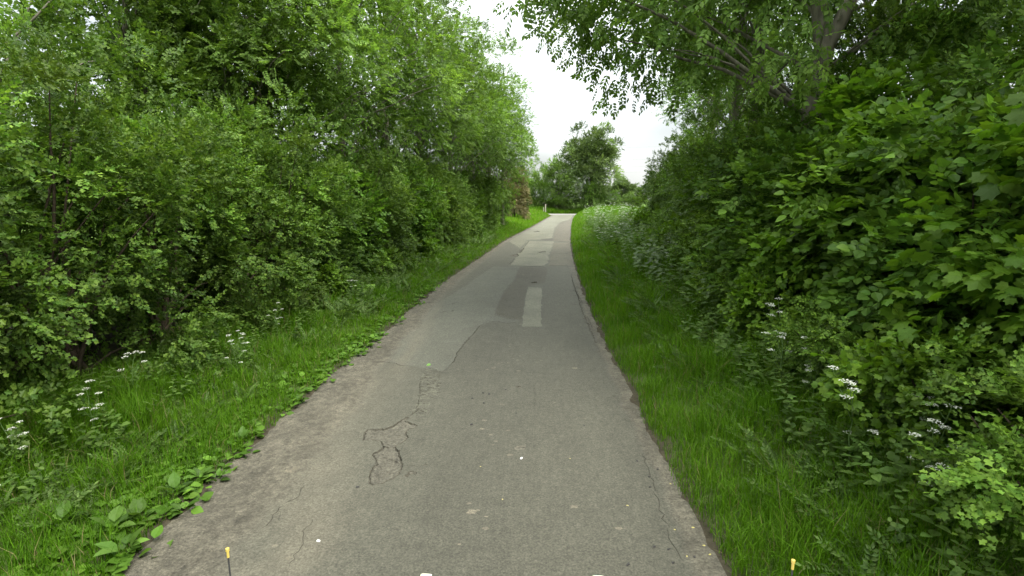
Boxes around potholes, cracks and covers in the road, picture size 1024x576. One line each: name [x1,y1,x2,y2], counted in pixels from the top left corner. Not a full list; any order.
crack [644,457,683,561]
crack [264,487,313,567]
crack [379,361,440,416]
crack [571,275,601,353]
